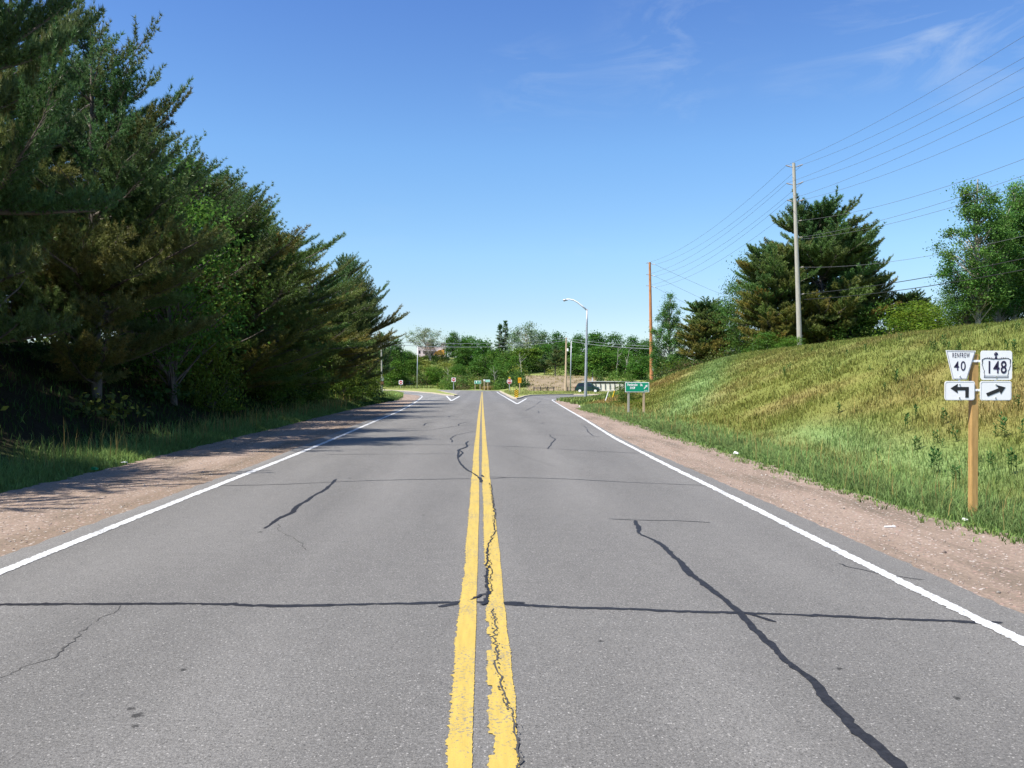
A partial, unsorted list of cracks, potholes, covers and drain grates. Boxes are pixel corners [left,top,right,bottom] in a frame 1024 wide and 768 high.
crack [488,608,524,768]
crack [0,605,121,678]
